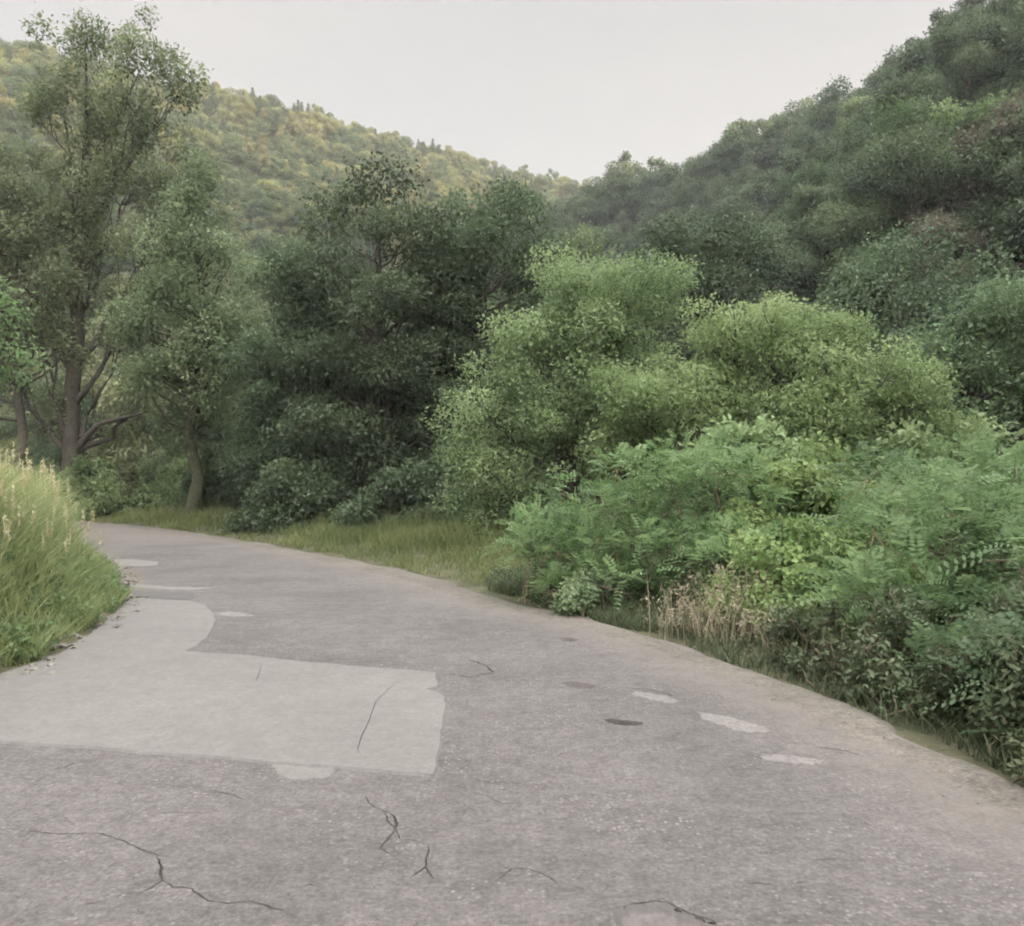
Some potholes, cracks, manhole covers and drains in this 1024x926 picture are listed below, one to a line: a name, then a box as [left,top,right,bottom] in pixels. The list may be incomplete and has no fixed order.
crack [365,795,449,879]
crack [11,828,318,918]
crack [496,867,557,883]
crack [442,659,494,678]
pothole [604,718,643,726]
crack [624,891,721,925]
crack [357,685,393,760]
